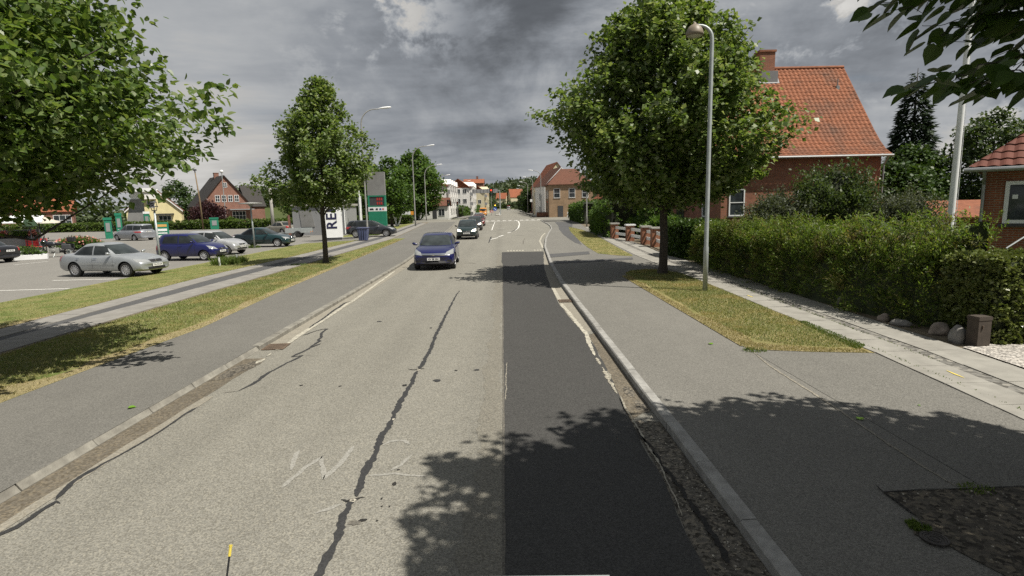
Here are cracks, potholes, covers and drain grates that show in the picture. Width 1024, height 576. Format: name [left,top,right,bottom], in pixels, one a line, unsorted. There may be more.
manhole cover [919,531,950,547]
